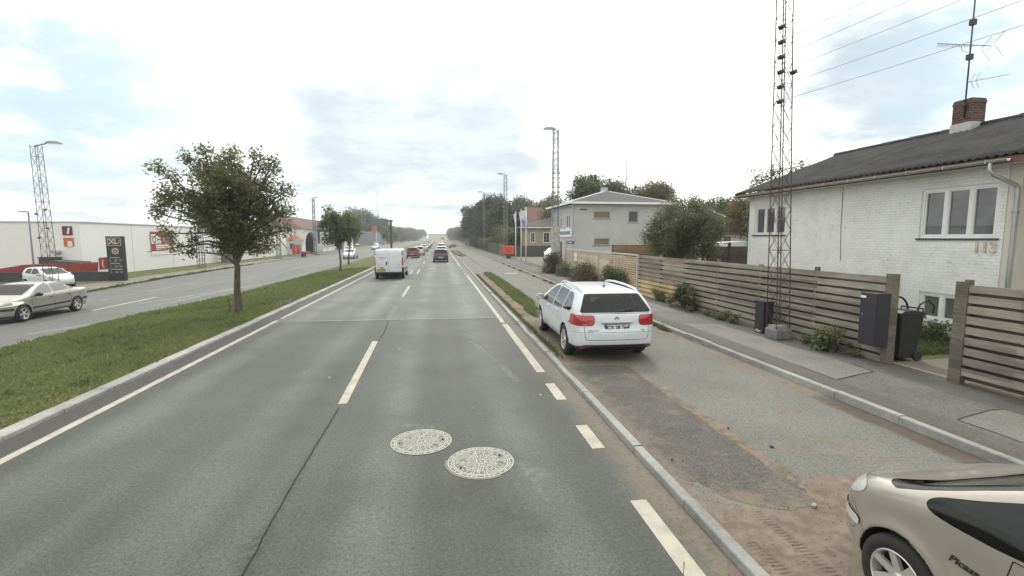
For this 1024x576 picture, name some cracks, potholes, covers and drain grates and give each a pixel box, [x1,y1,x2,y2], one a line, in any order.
manhole cover [390,429,452,455]
manhole cover [445,447,514,480]
